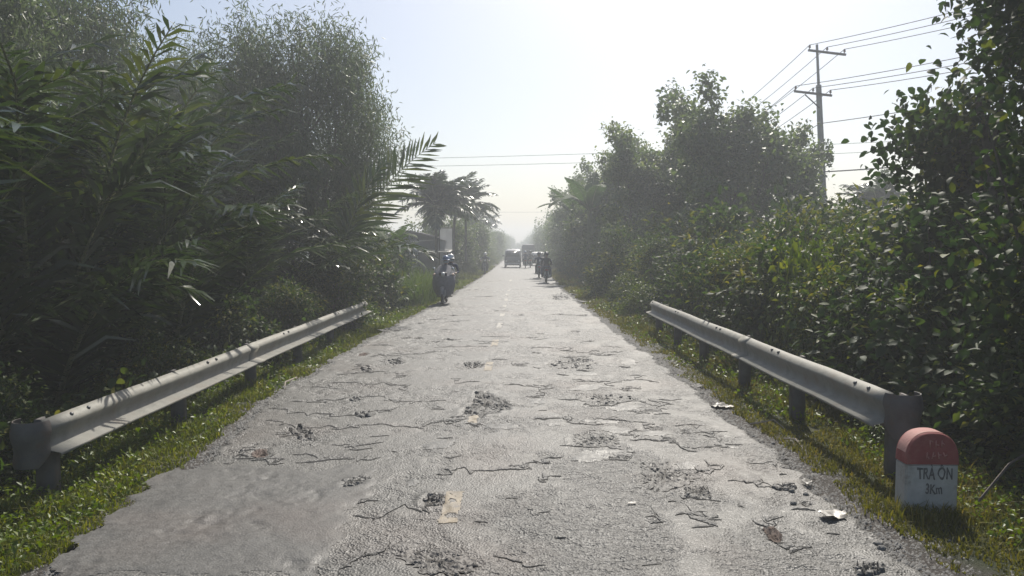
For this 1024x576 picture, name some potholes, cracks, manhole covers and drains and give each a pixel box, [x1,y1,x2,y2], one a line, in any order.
pothole [684,486,712,500]
crack [493,550,545,567]
crack [340,541,387,569]
pothole [575,393,636,406]
pothole [343,477,364,487]
pothole [462,391,511,418]
pothole [573,433,622,447]
pothole [396,548,482,576]
pothole [423,491,445,506]
pothole [288,423,316,442]
pothole [640,459,700,492]
